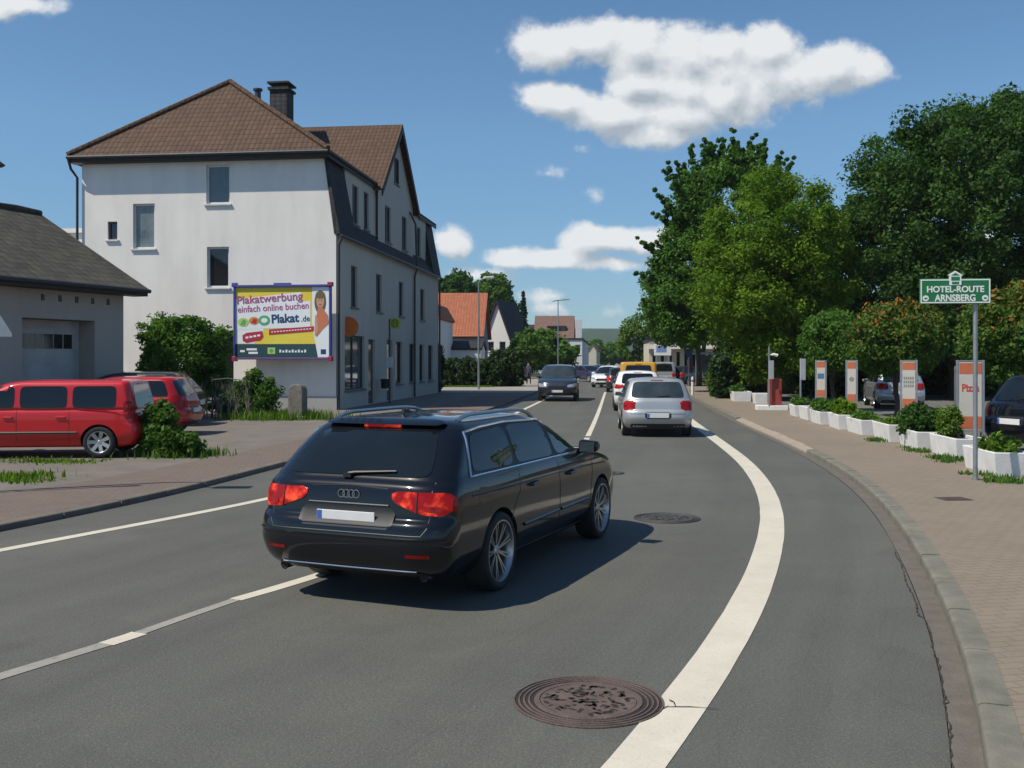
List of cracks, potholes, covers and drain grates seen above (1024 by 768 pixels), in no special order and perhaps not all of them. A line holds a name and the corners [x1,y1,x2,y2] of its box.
crack [894,551,954,768]
manhole cover [633,512,701,524]
manhole cover [513,676,665,729]
crack [654,699,719,712]
